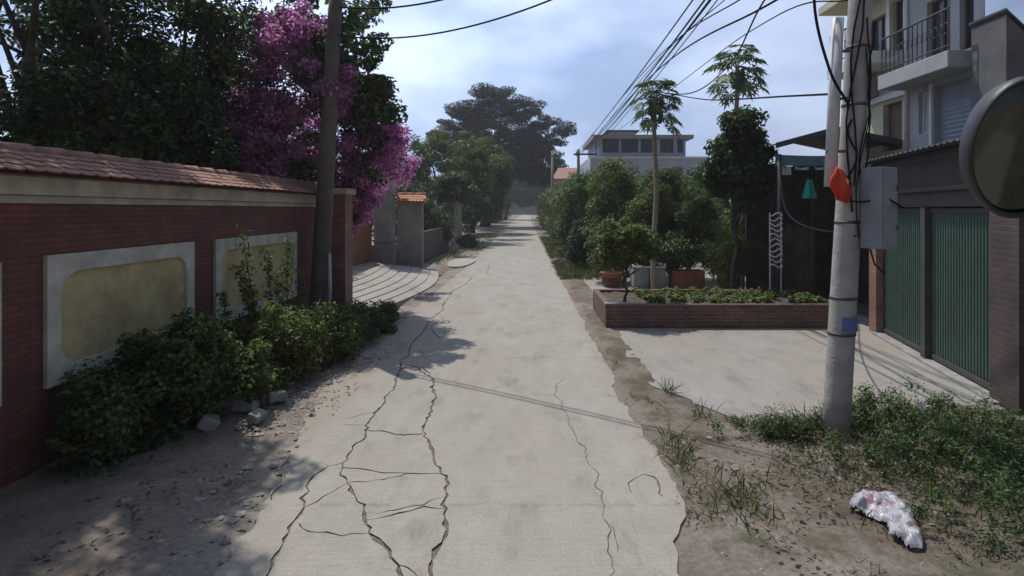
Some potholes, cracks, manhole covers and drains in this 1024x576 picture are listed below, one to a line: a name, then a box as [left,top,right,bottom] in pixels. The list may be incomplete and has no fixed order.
crack [554,379,619,576]
crack [266,278,471,576]
crack [628,474,664,497]
